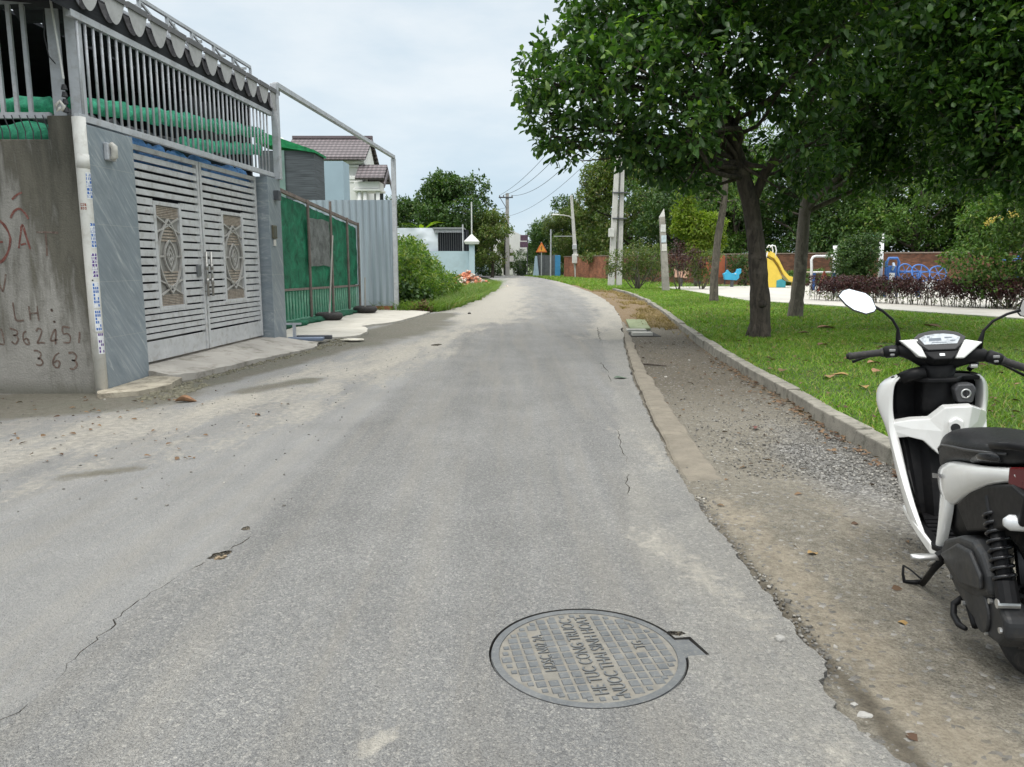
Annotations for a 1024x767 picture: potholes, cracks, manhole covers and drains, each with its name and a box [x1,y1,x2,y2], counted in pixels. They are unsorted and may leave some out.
crack [597,327,630,494]
crack [0,563,203,720]
pothole [207,537,250,560]
manhole cover [489,609,710,709]
